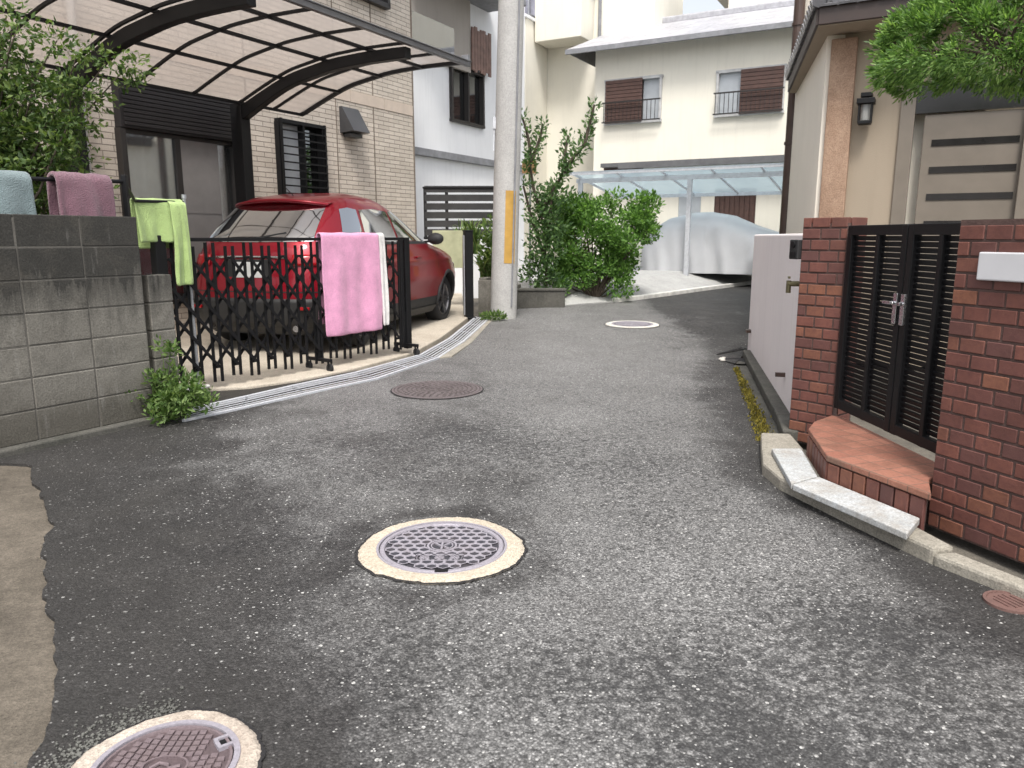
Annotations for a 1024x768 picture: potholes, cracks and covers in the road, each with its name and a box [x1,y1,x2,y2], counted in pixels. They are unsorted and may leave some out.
manhole cover [605,320,660,329]
manhole cover [67,707,266,768]
utility cover [982,590,1024,615]
manhole cover [390,380,484,400]
manhole cover [354,517,528,585]
